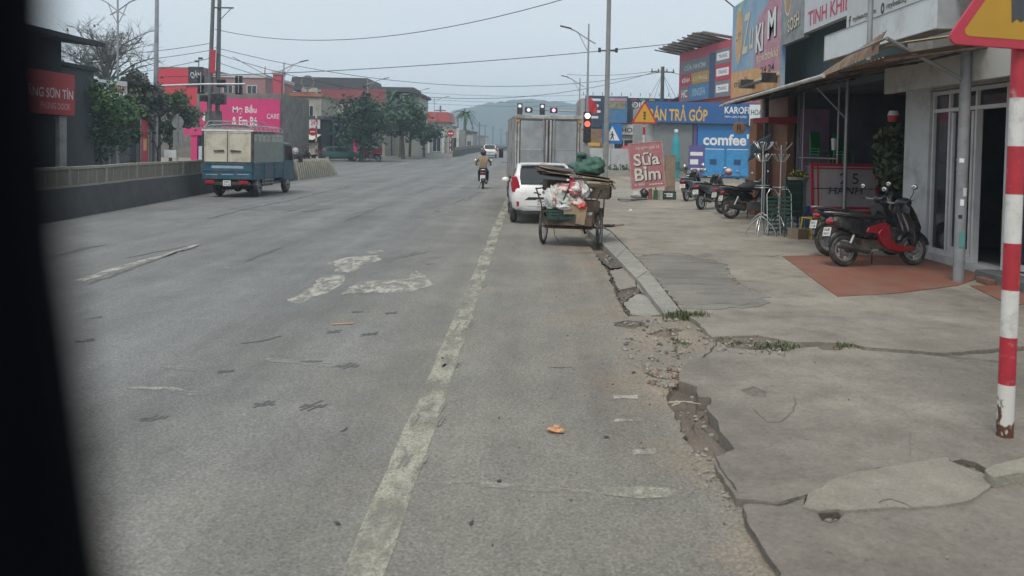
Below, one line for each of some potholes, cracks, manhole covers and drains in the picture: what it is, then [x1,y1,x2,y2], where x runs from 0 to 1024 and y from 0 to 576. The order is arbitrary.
crack [585,252,630,316]
crack [714,453,805,576]
pothole [666,383,726,458]
pothole [819,512,841,523]
